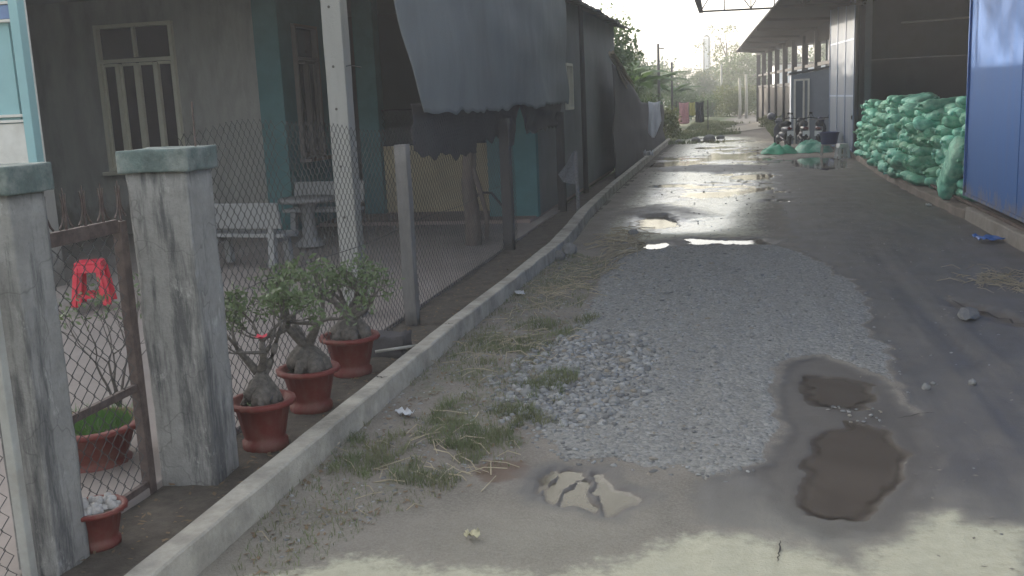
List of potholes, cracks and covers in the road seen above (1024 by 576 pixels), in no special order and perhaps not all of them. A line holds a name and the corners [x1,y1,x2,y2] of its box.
pothole [772,350,922,418]
pothole [756,412,941,540]
pothole [632,213,682,230]
